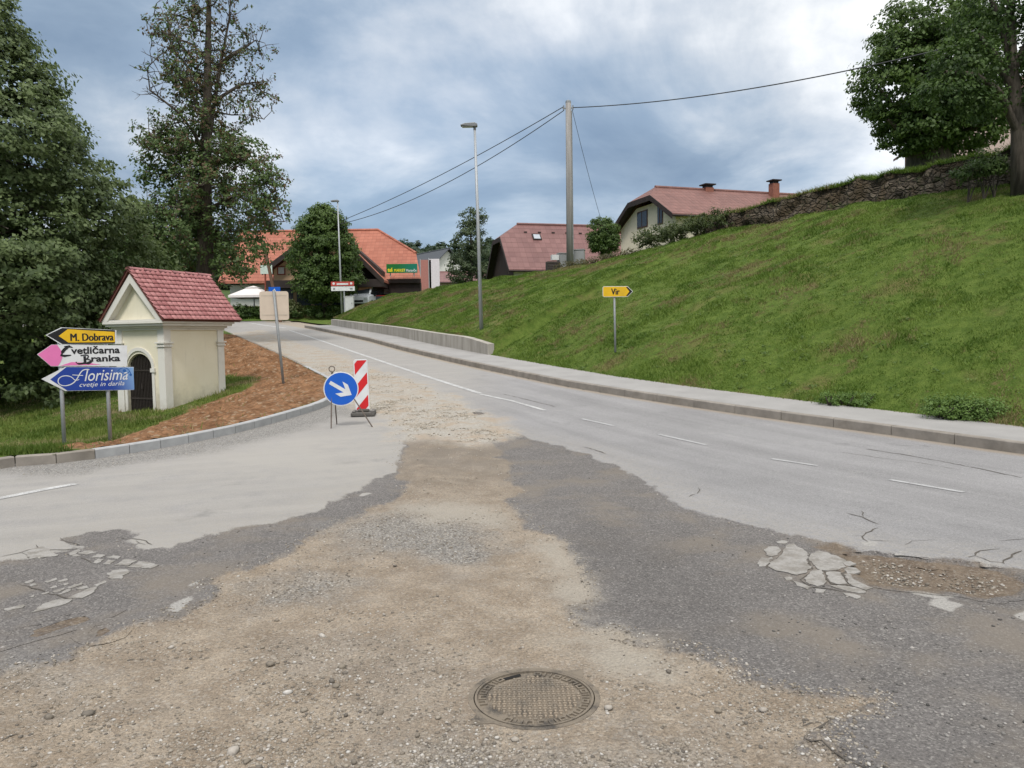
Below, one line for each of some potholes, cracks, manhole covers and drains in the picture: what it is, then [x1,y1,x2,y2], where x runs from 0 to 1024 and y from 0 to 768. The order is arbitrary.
manhole cover [468,668,600,730]
crack [955,539,1022,564]
crack [4,537,159,613]
pothole [830,547,1024,604]
crack [757,512,915,600]
